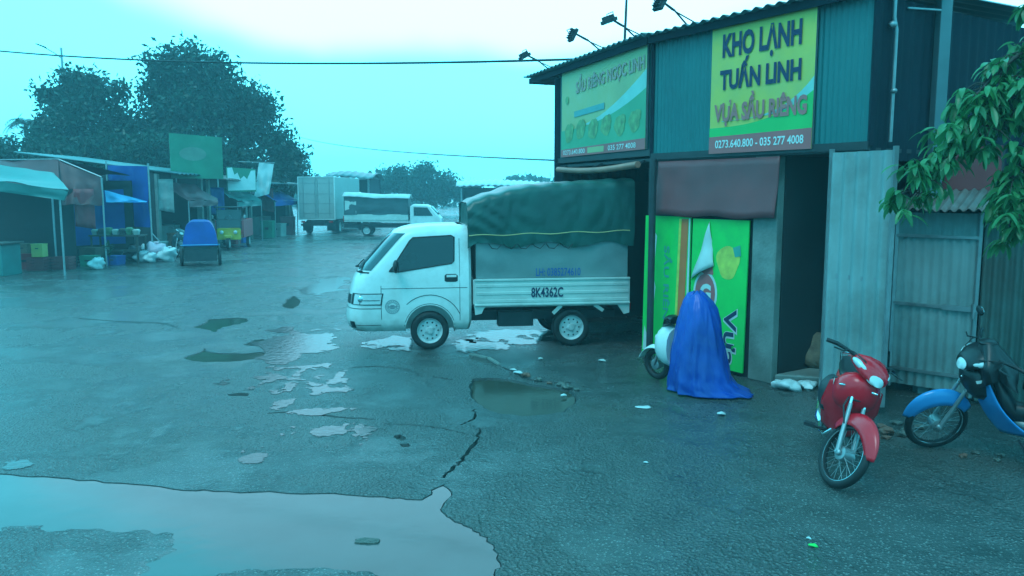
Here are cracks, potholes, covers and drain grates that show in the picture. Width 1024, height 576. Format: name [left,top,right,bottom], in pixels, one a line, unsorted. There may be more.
pothole [184,349,265,362]
crack [78,318,176,327]
crack [267,409,481,478]
pothole [0,473,502,576]
pothole [469,378,578,416]
pothole [194,318,249,332]
